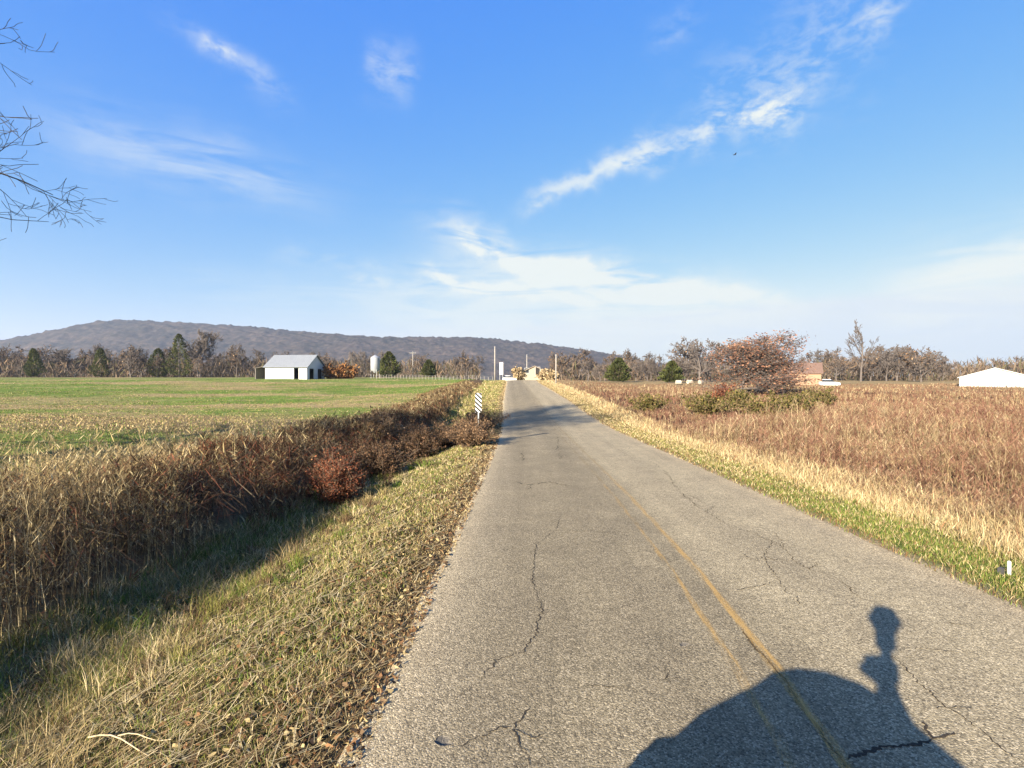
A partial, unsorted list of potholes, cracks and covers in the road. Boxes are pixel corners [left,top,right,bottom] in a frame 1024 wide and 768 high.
crack [737,530,864,604]
crack [462,518,615,695]
crack [460,708,546,766]
